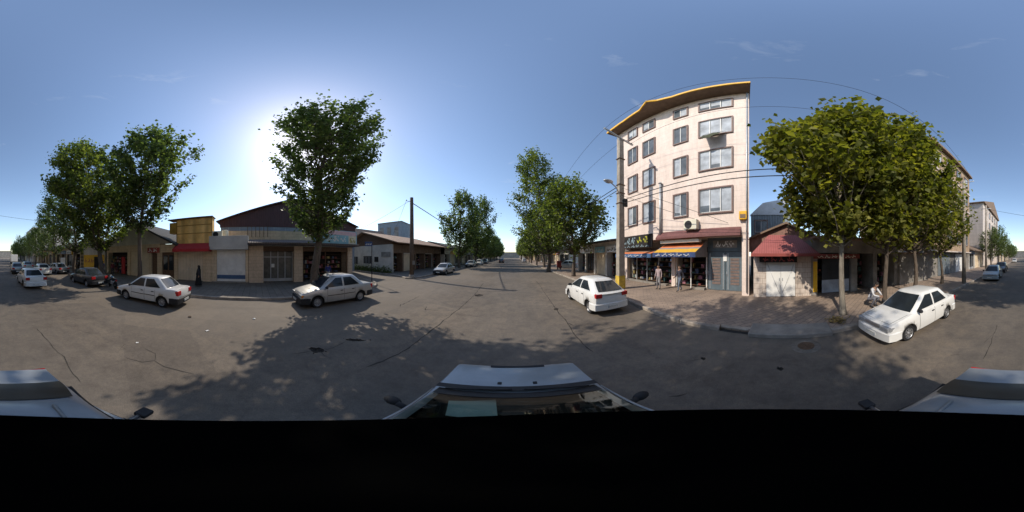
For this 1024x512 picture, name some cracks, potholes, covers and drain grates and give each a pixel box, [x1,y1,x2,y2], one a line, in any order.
manhole cover [791,340,821,353]
